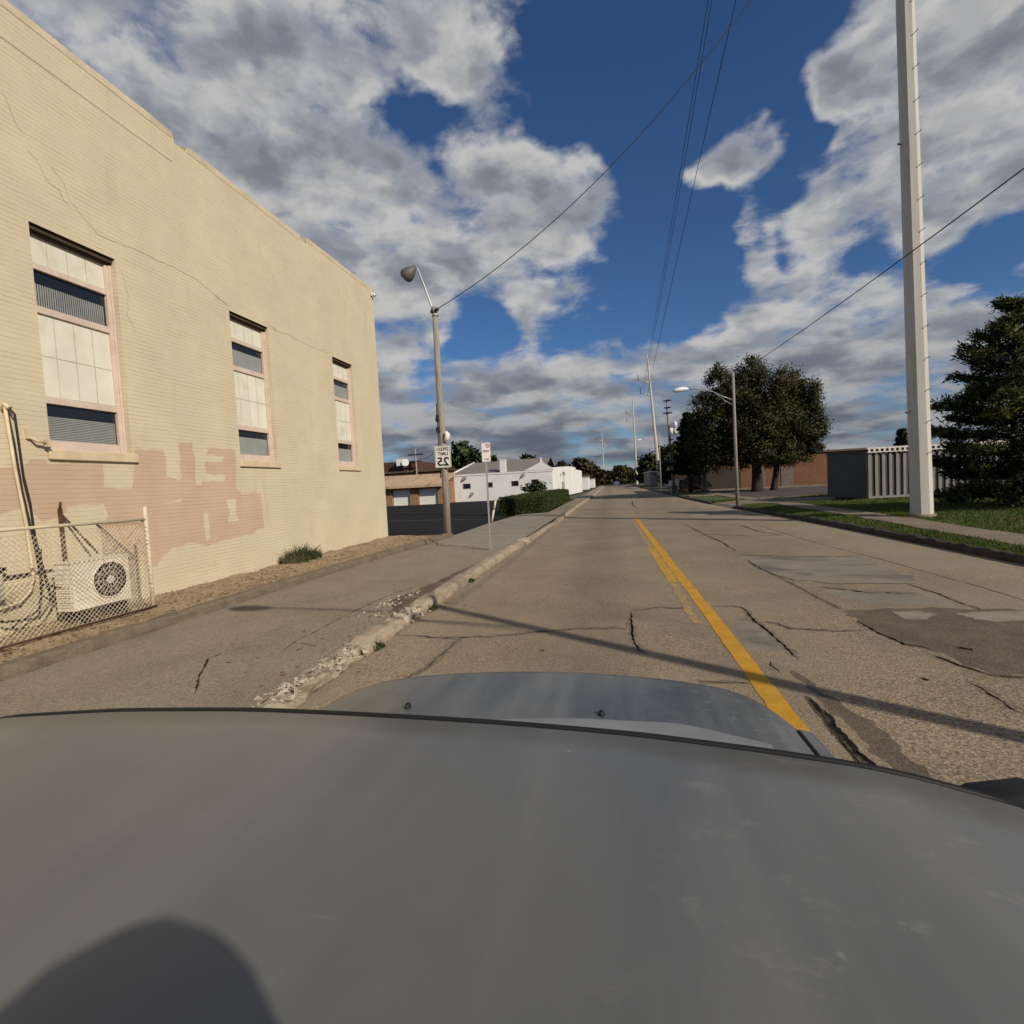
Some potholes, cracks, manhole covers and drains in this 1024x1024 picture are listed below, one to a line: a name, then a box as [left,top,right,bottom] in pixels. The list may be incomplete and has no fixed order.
crack [685,524,1024,714]
crack [282,591,400,651]
crack [195,643,262,694]
crack [396,607,682,678]
